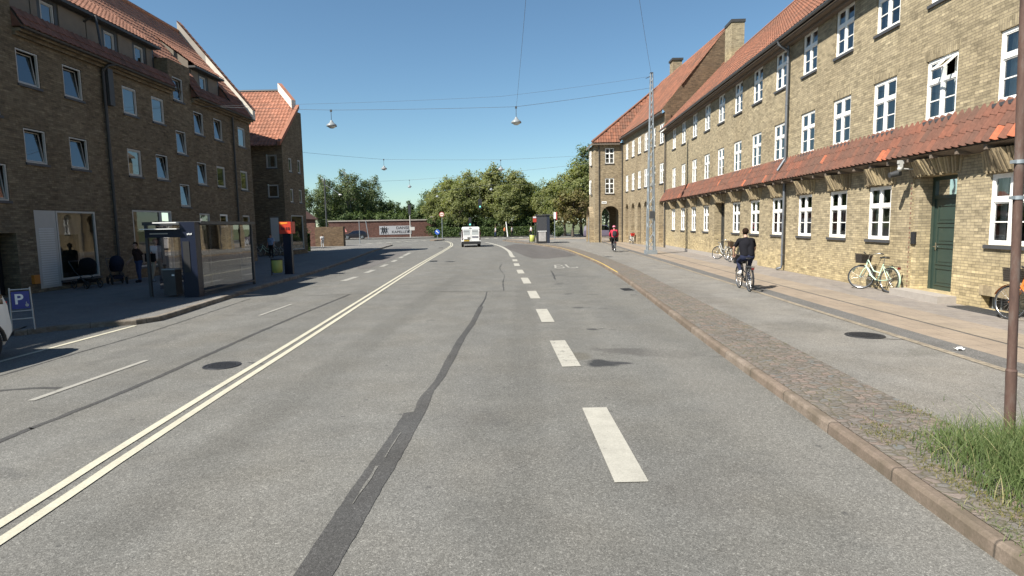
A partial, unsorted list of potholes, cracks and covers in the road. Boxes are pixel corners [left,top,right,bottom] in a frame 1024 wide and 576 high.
manhole cover [202,361,242,370]
